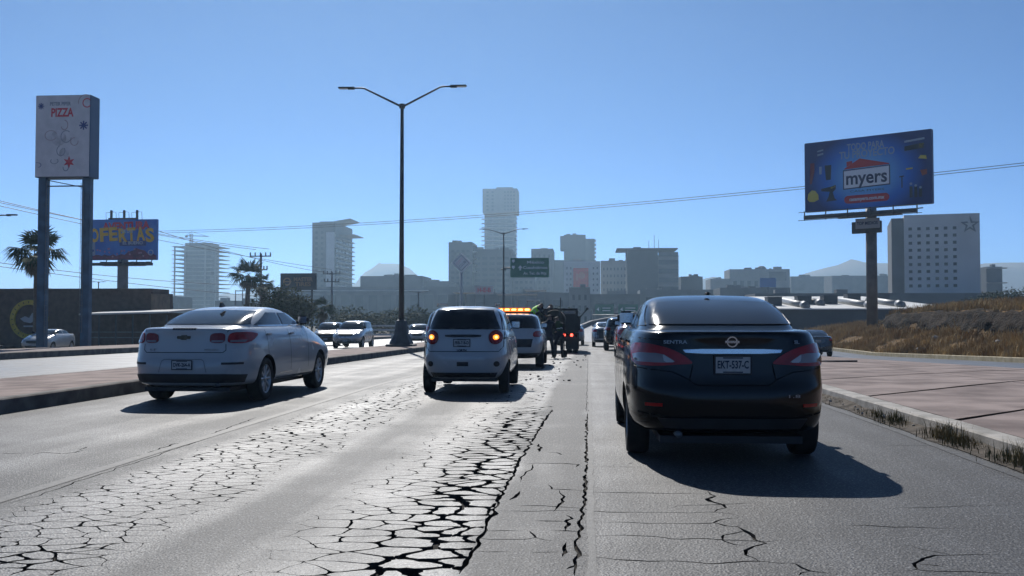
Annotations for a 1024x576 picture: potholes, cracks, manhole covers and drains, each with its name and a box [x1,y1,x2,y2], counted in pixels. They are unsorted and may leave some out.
crack [907,545,1010,574]
crack [0,377,468,575]
crack [231,365,832,576]
